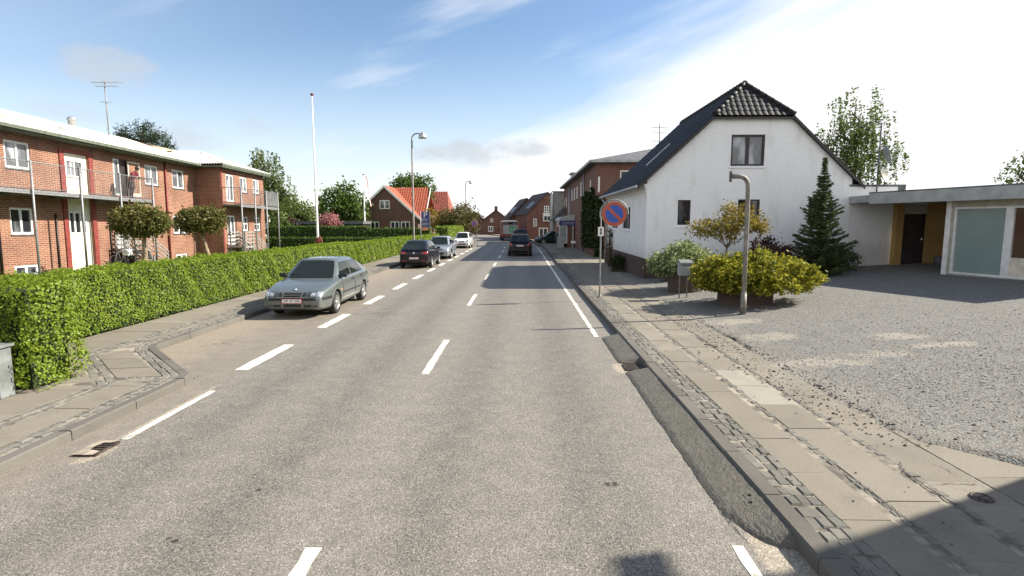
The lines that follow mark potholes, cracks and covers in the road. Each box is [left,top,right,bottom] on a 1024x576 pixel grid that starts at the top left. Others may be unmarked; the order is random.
manhole cover [969,492,995,503]
drain grate [71,440,120,457]
